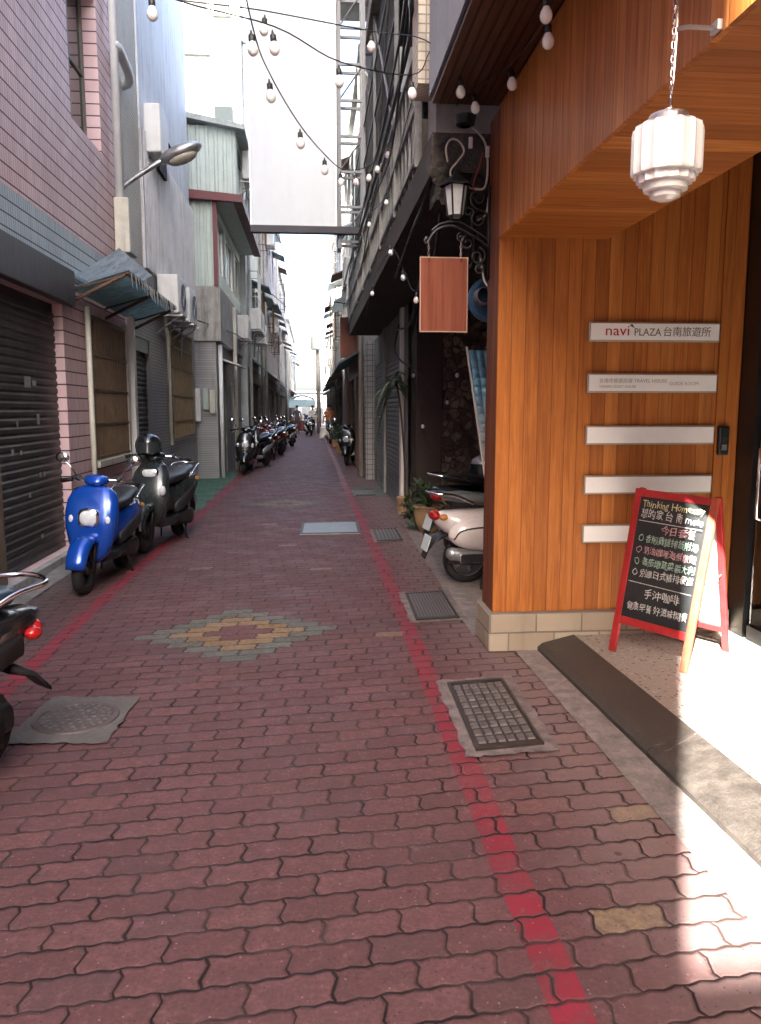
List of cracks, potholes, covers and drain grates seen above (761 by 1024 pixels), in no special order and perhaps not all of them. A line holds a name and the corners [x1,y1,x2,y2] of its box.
manhole cover [8,696,141,744]
manhole cover [299,521,361,535]
